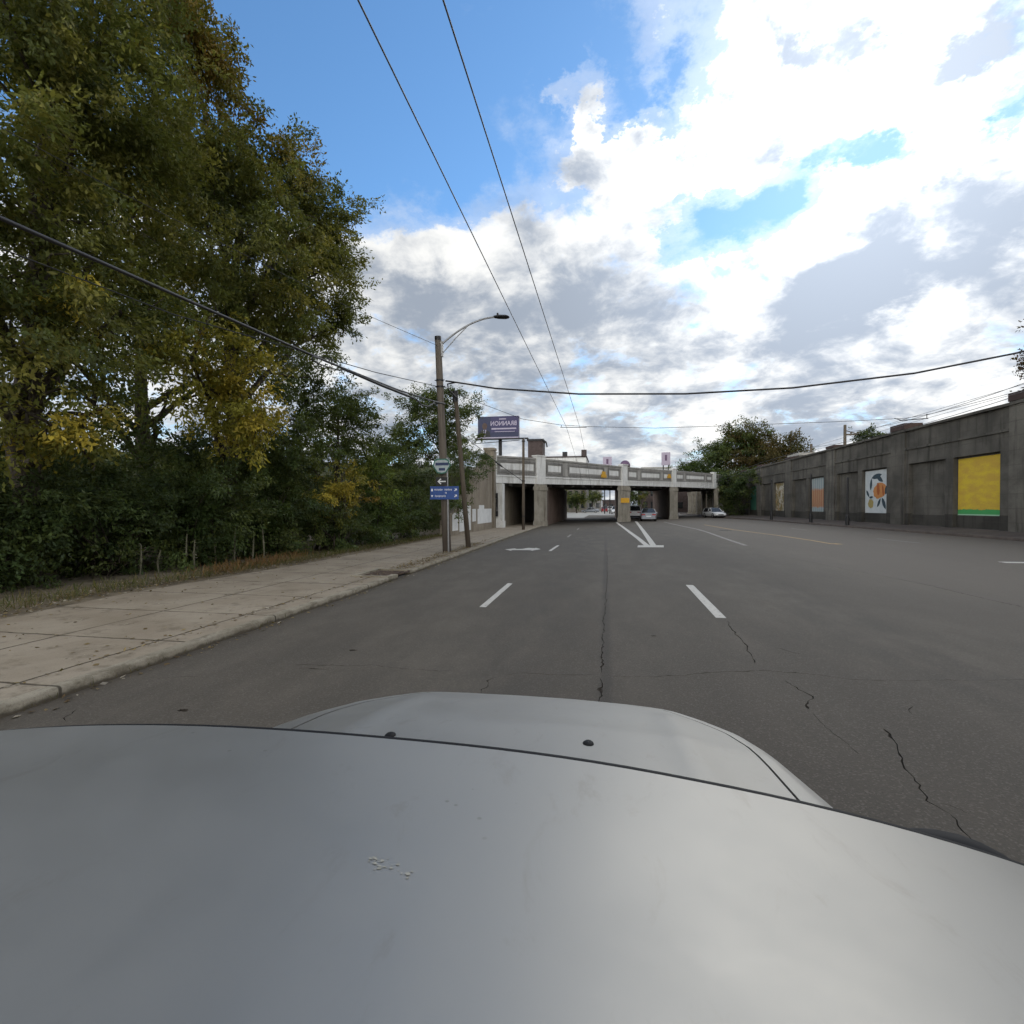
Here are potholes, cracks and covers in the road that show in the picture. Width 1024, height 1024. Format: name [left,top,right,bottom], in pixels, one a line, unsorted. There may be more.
crack [597,559,608,702]
crack [615,624,1020,754]
drain grate [350,568,412,582]
crack [884,729,970,837]
